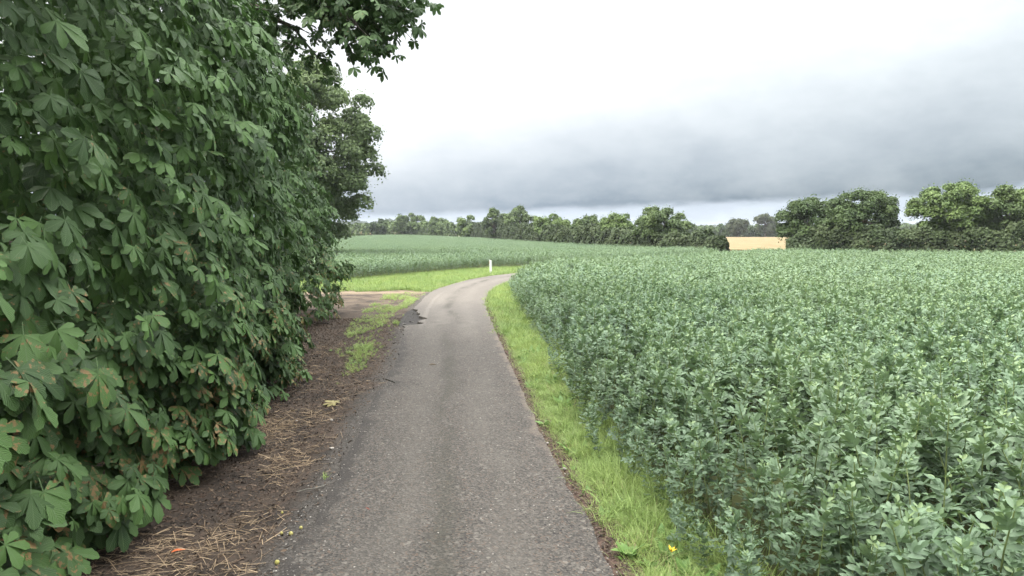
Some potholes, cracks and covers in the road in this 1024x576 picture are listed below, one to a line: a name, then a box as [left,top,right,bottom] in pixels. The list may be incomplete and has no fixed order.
pothole [399,310,423,326]
